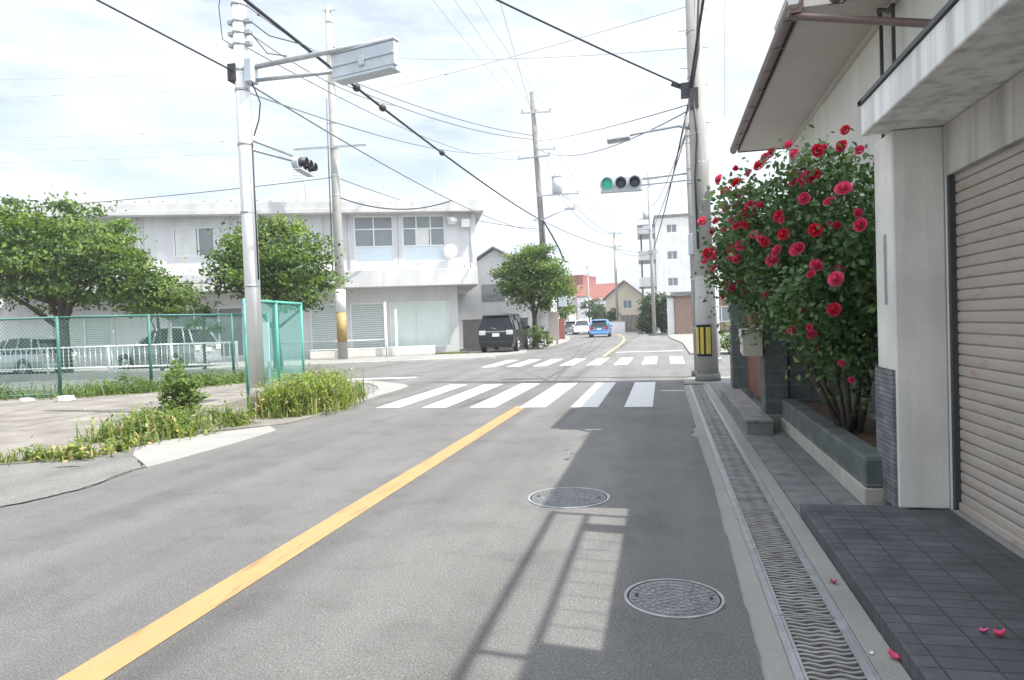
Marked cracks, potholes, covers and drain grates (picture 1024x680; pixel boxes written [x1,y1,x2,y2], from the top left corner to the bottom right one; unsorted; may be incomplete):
drain grate [748,548,843,619]
drain grate [715,455,759,478]
drain grate [700,416,729,427]
drain grate [772,614,881,680]
drain grate [704,426,737,440]
drain grate [722,477,777,508]
drain grate [697,407,723,417]
manhole cover [624,579,725,619]
manhole cover [528,487,610,509]
crack [0,460,143,507]
drain grate [733,506,802,551]
drain grate [709,439,746,457]
